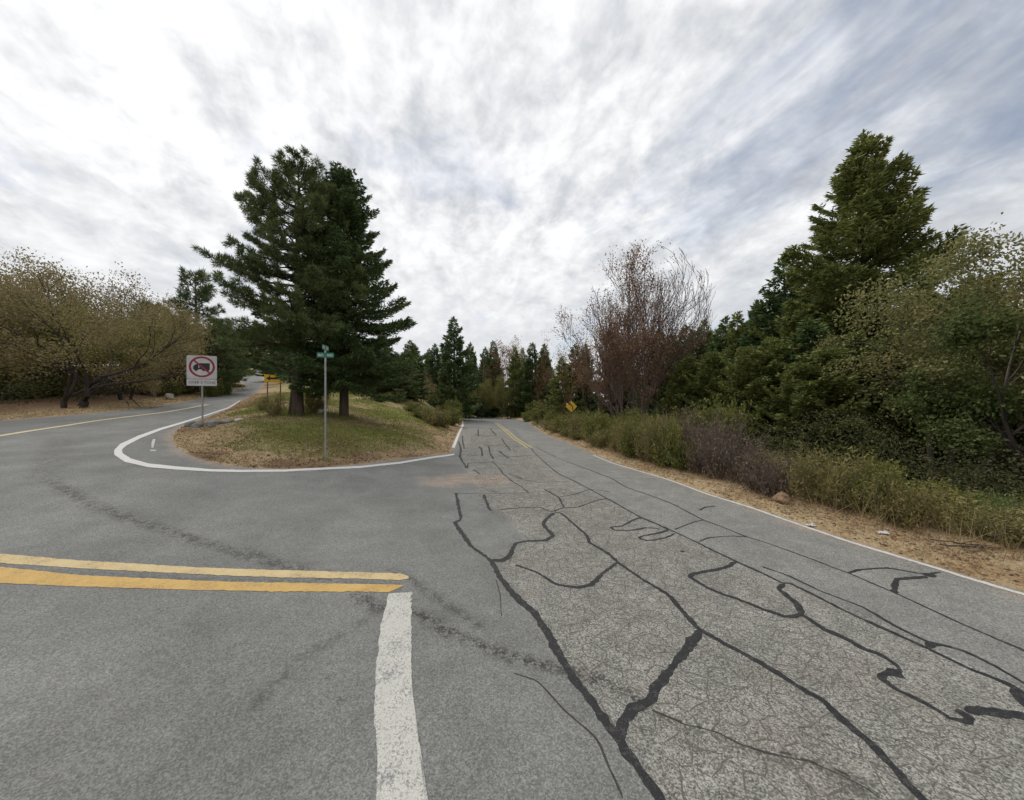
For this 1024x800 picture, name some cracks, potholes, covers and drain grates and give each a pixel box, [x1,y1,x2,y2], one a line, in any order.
crack [453,428,1024,800]
